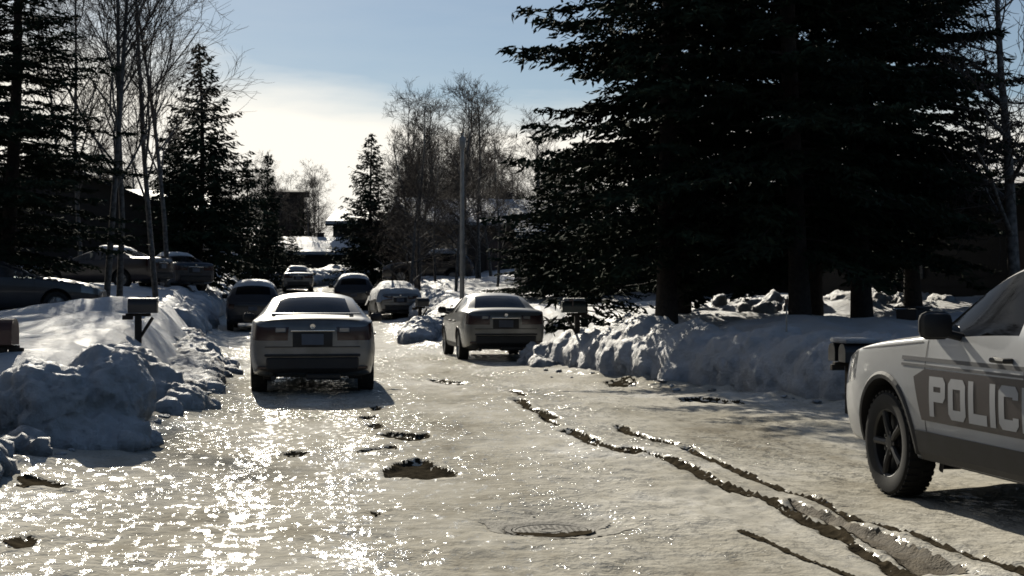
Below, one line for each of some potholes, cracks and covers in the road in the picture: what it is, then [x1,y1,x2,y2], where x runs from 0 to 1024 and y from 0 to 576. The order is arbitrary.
pothole [376,432,430,441]
pothole [382,458,458,480]
manhole cover [478,510,634,539]
